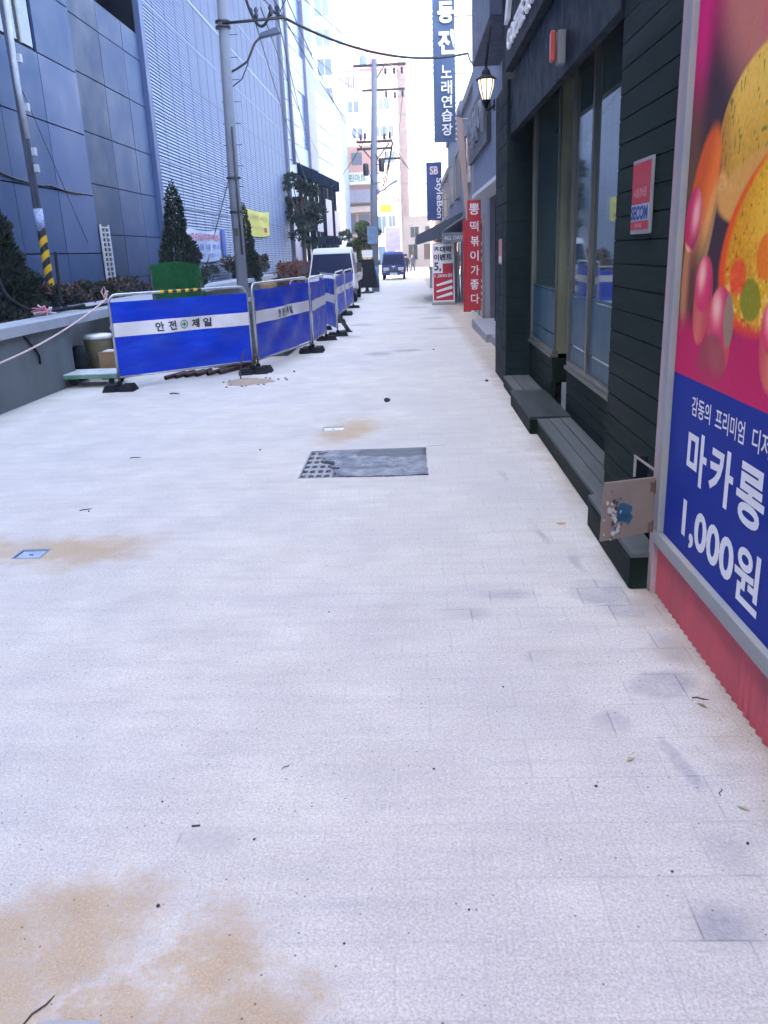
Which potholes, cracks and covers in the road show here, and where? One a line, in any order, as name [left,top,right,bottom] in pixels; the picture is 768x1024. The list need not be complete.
drain grate [297,448,427,479]
manhole cover [11,549,51,559]
